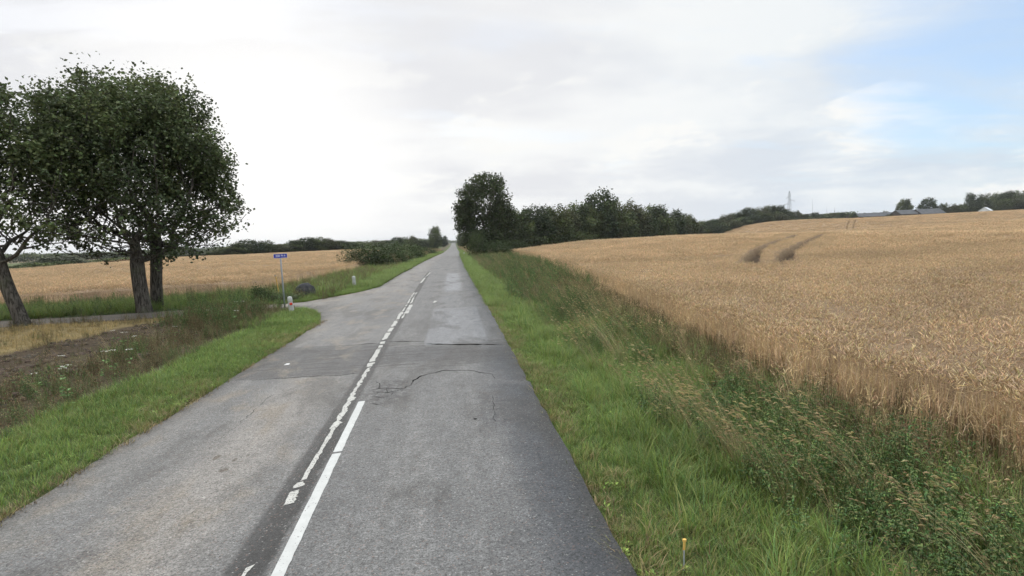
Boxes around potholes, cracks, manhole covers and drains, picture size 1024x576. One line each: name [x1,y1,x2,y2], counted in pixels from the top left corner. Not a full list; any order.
crack [372,370,494,405]
